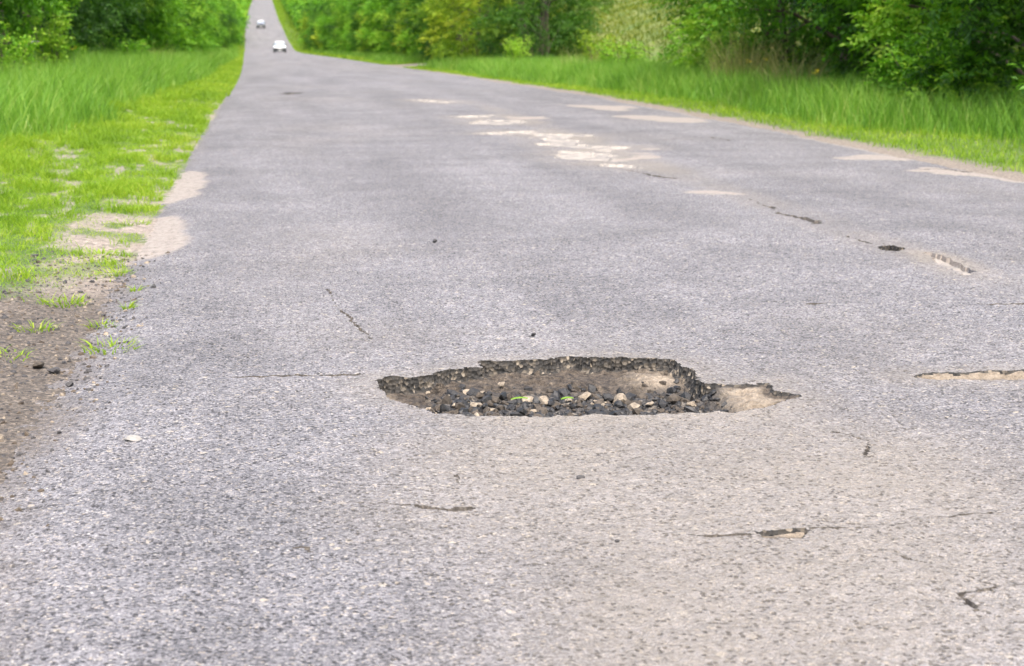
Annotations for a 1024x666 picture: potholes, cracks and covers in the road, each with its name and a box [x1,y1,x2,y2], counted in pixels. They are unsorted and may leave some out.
crack [831,431,871,458]
crack [897,554,1000,612]
pothole [375,356,802,417]
crack [356,502,476,512]
pothole [913,369,1024,380]
crack [325,289,374,340]
crack [749,199,822,224]
pothole [922,252,977,275]
